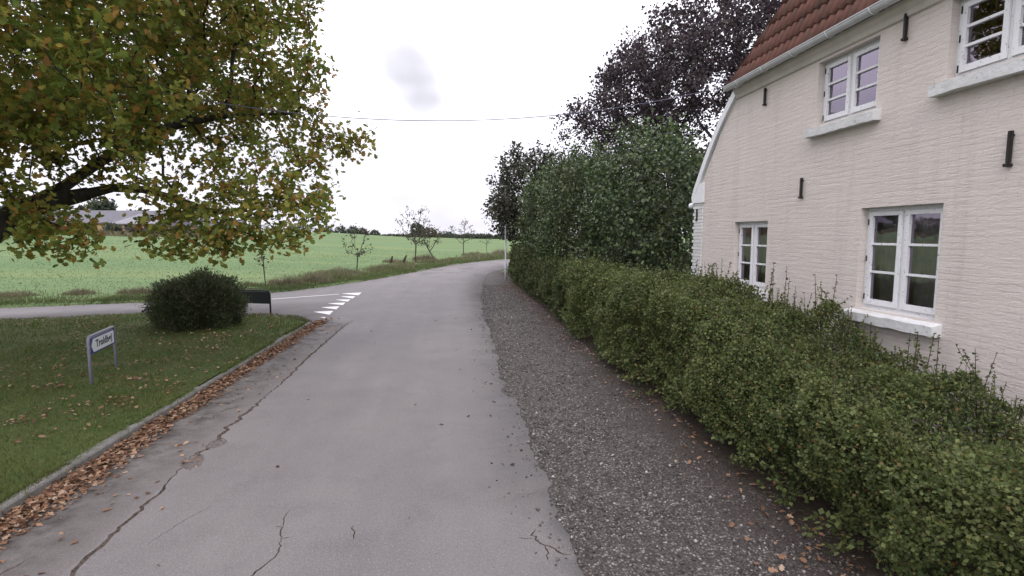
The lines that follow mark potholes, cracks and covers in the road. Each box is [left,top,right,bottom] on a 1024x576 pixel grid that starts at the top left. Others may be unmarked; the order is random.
crack [251,512,290,576]
crack [524,531,574,560]
